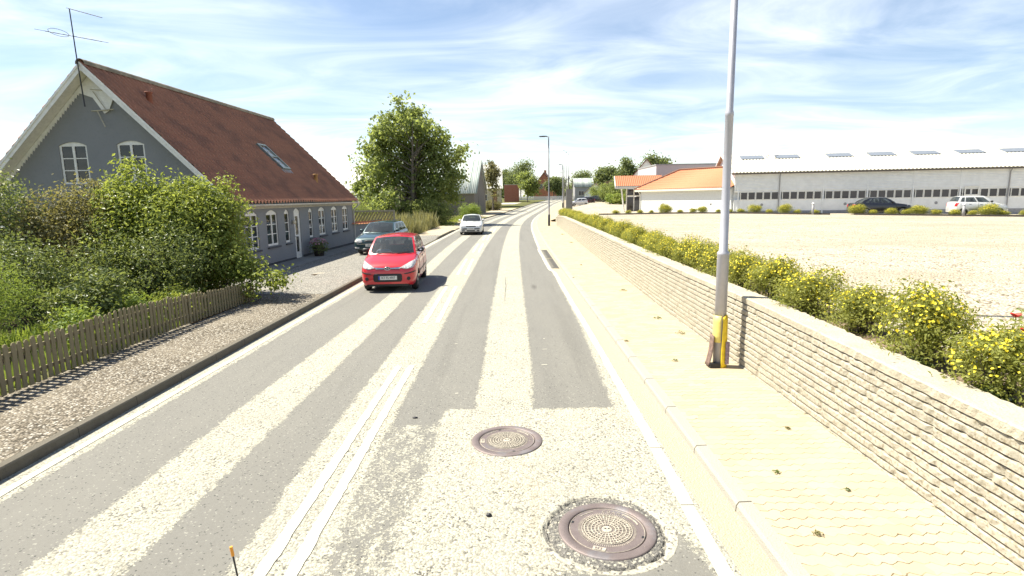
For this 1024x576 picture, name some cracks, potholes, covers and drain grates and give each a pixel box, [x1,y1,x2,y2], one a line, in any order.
manhole cover [472,426,542,457]
manhole cover [558,503,657,561]
